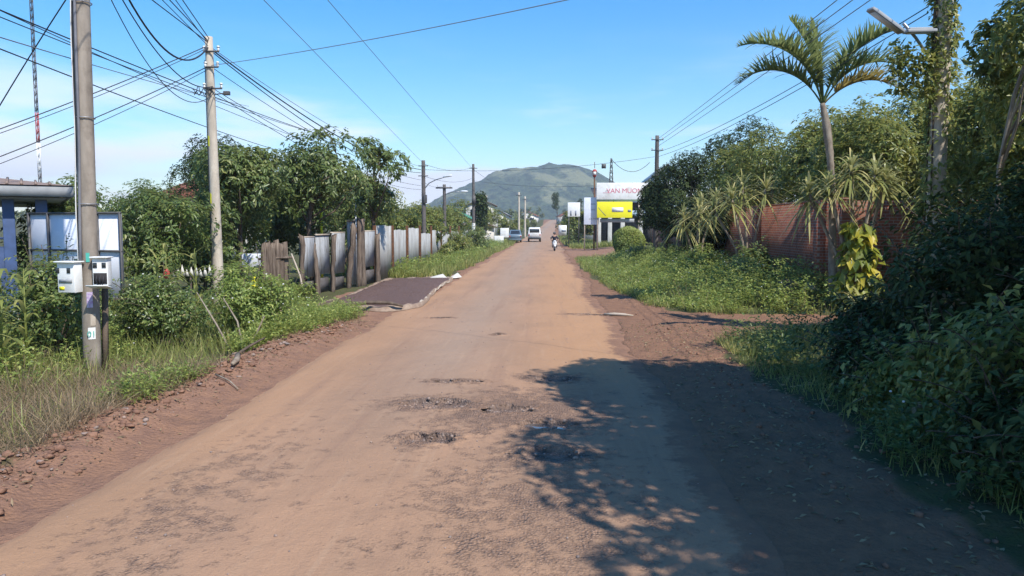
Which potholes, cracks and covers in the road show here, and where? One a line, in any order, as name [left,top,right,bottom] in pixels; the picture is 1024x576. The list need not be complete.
pothole [386,429,472,447]
pothole [424,377,493,385]
pothole [387,396,490,412]
pothole [457,401,547,415]
